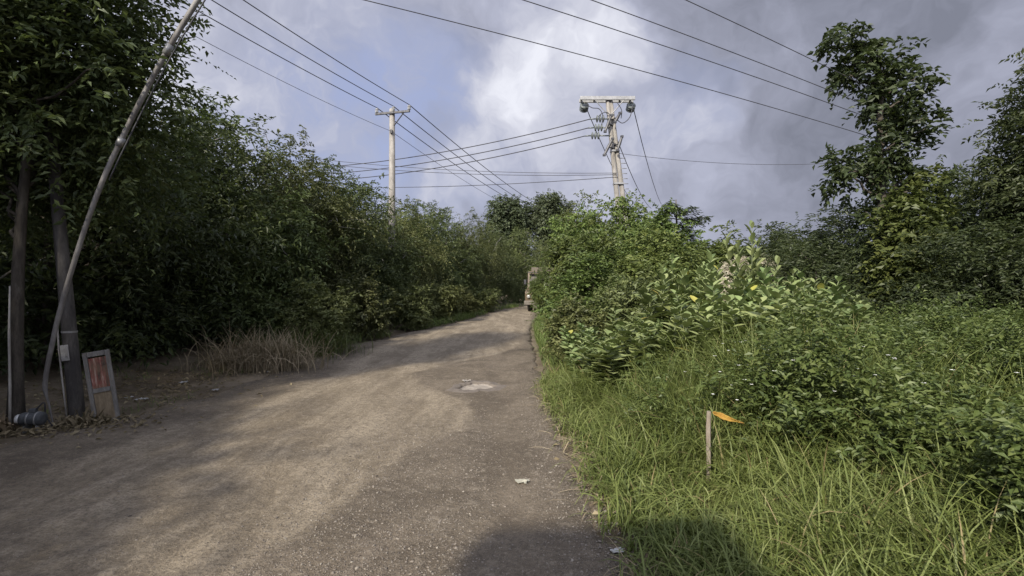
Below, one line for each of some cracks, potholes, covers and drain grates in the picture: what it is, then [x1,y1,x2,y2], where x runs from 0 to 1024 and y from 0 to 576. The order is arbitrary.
pothole [447,380,507,393]
